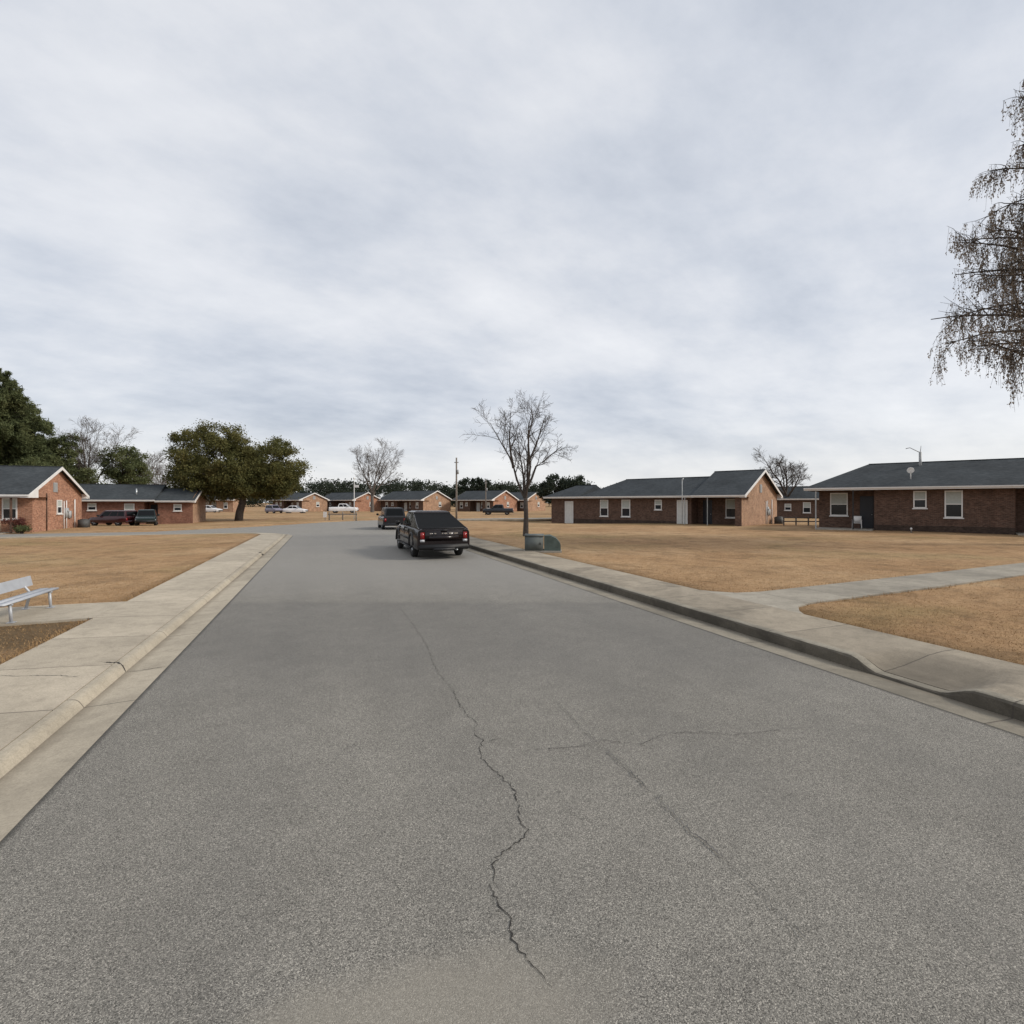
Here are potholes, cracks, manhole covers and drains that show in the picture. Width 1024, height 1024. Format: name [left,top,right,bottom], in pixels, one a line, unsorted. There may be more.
crack [547,727,814,749]
crack [399,608,551,986]
